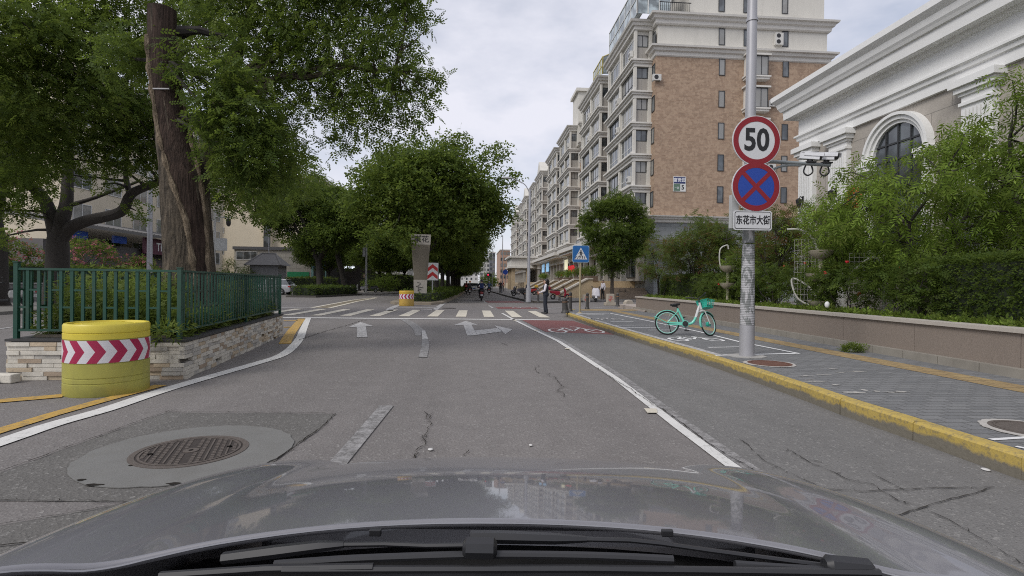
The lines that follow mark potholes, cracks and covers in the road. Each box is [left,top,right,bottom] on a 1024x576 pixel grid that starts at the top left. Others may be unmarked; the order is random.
crack [413,411,432,458]
manhole cover [67,425,294,488]
crack [597,367,1023,564]
manhole cover [977,419,1024,437]
